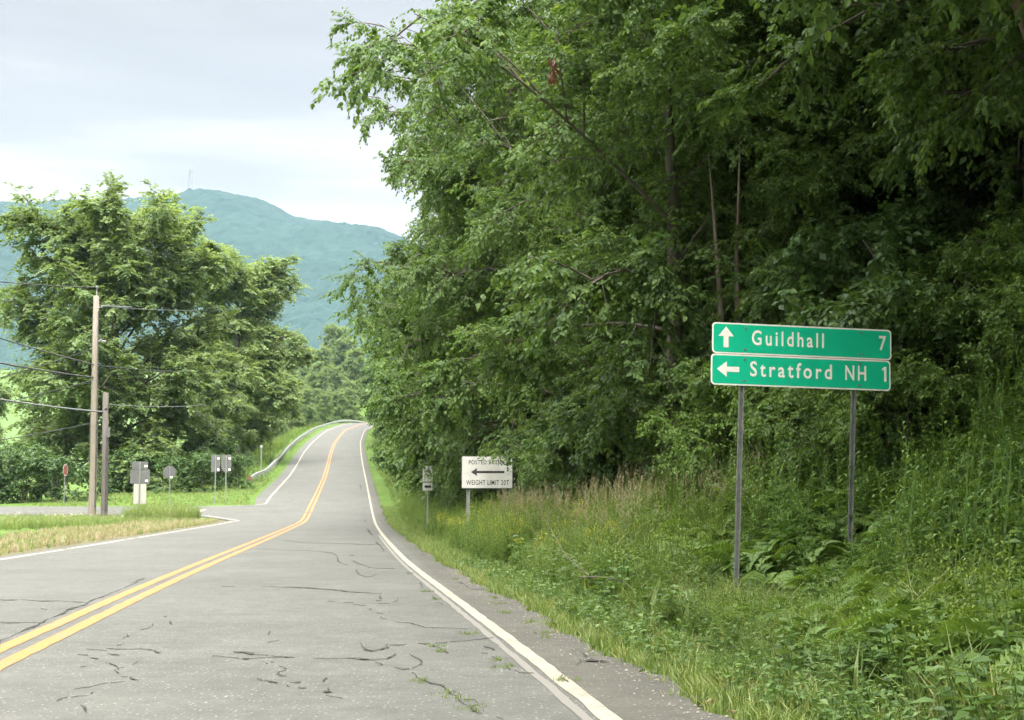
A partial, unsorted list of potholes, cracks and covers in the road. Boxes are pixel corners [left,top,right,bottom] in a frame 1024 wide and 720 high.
crack [57,616,171,712]
crack [211,520,531,719]
crack [0,599,79,623]
